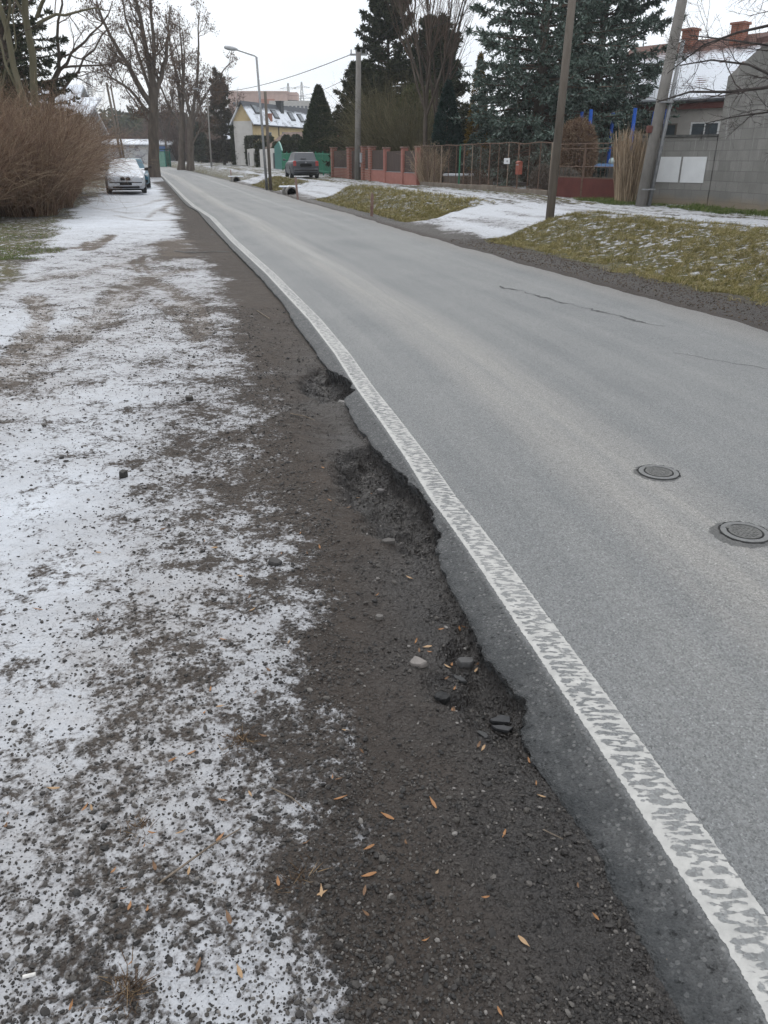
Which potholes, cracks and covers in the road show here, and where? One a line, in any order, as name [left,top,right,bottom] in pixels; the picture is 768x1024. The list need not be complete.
pothole [293,365,355,404]
pothole [327,440,442,558]
manhole cover [636,464,681,480]
pothole [435,611,531,759]
manhole cover [718,521,768,543]
crack [499,286,661,326]
